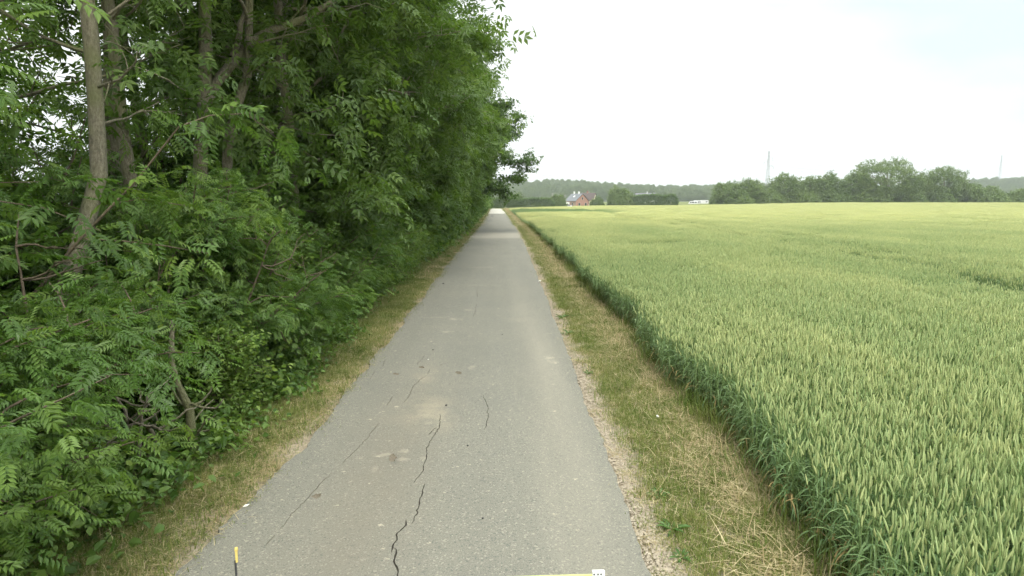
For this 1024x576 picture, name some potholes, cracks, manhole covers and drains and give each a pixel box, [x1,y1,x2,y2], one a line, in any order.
crack [391,416,441,576]
